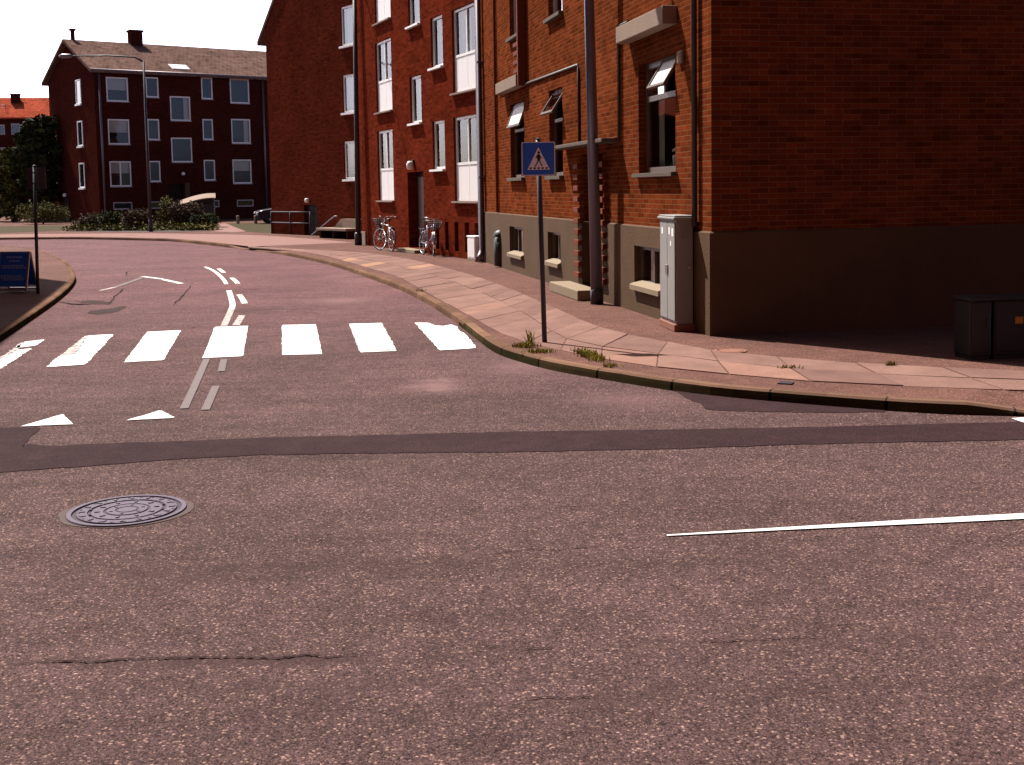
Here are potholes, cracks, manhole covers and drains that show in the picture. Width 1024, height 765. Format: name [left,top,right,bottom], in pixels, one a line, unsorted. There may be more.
crack [25,654,360,663]
manhole cover [58,494,194,528]
crack [108,268,254,305]
